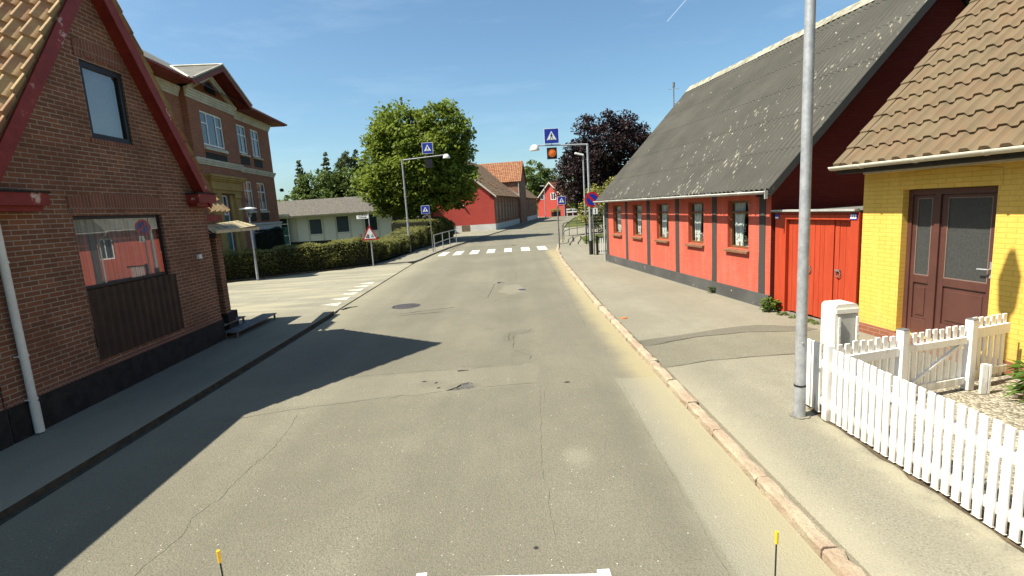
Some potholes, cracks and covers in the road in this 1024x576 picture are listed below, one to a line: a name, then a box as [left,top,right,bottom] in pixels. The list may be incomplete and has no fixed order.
pothole [447,382,476,391]
crack [489,383,556,537]
crack [137,391,442,574]
